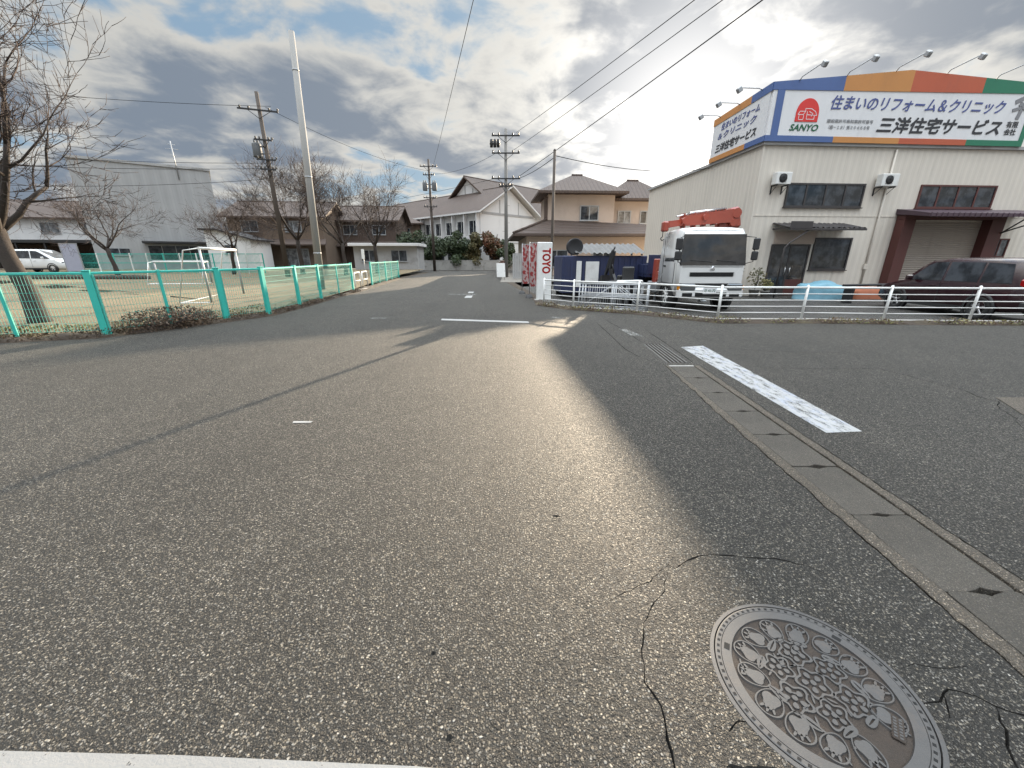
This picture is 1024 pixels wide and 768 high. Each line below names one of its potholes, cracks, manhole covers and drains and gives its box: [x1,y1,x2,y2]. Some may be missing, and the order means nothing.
crack [611,554,830,768]
manhole cover [710,604,950,768]
drain grate [644,344,688,363]
crack [924,688,1024,768]
